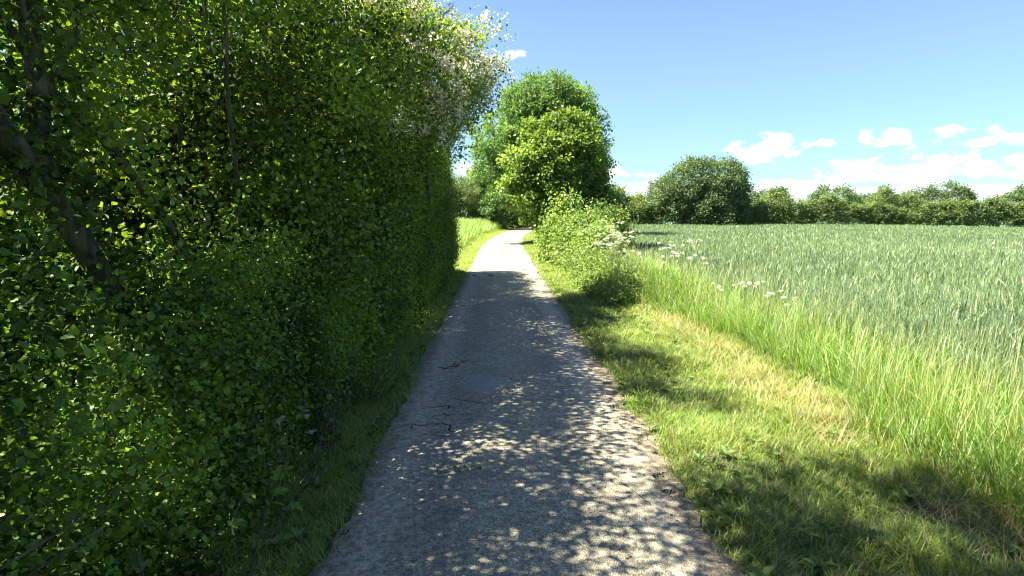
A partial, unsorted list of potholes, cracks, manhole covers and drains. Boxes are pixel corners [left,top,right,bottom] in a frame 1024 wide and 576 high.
crack [394,398,492,437]
pothole [651,472,669,482]
